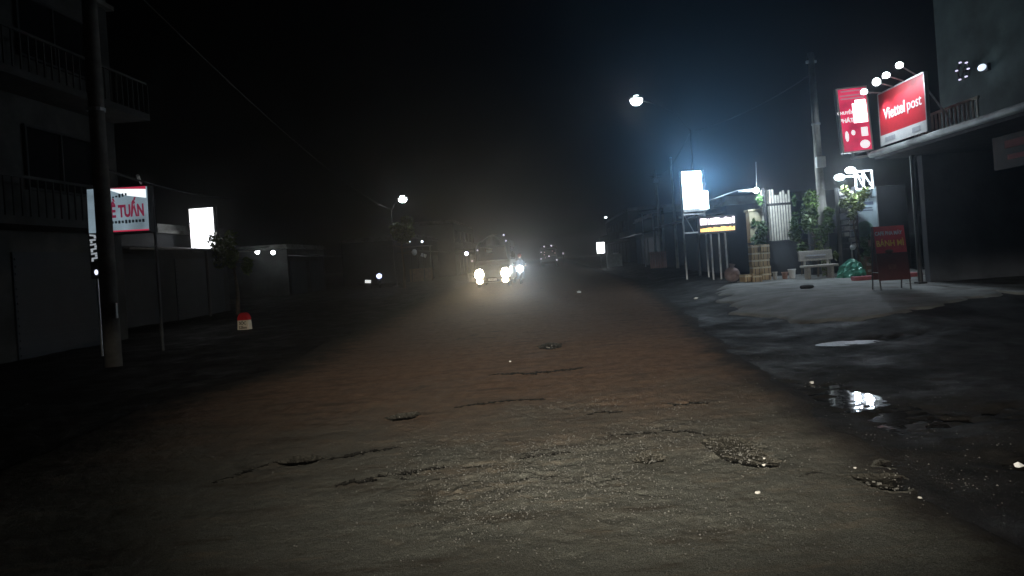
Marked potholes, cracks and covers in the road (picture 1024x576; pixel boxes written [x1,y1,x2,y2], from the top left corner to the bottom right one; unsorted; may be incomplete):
crack [585,401,710,437]
pothole [845,472,915,493]
pothole [534,342,564,350]
pothole [629,449,673,466]
pothole [697,436,786,470]
pothole [870,458,897,469]
crack [211,446,449,489]
crack [454,398,547,408]
crack [487,366,587,376]
pothole [382,411,424,422]
